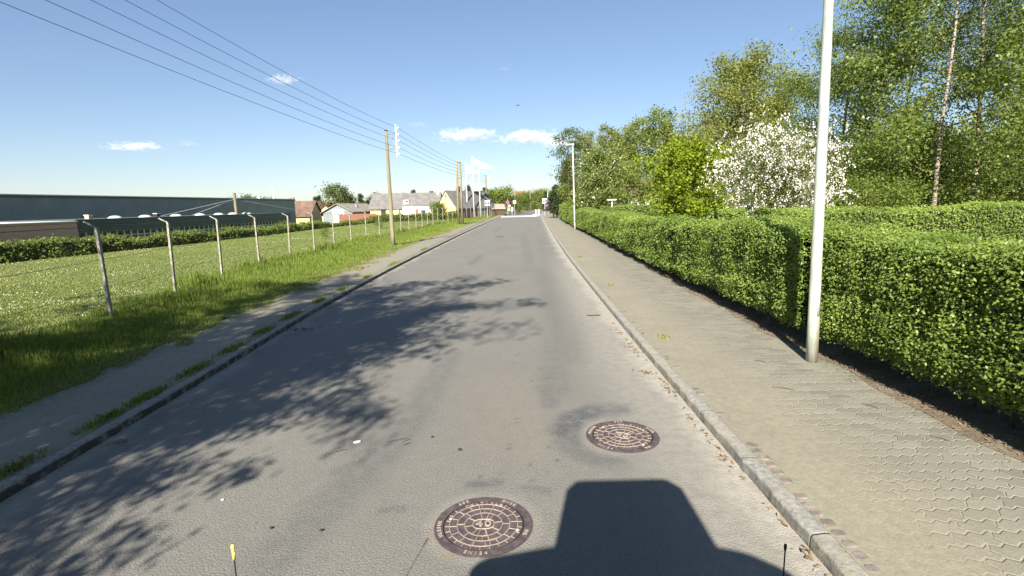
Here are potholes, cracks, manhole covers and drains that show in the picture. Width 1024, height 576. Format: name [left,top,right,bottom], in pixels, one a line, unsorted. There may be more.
manhole cover [434,497,533,558]
manhole cover [586,421,660,453]
